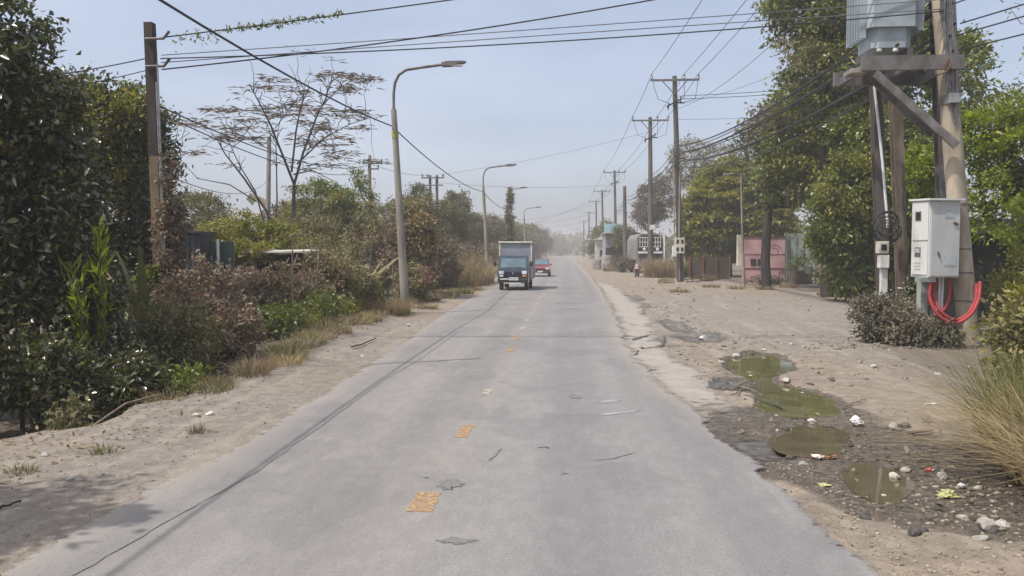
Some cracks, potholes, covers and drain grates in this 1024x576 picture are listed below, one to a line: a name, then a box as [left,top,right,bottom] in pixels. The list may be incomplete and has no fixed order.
pothole [435,537,476,545]
pothole [437,479,465,490]
